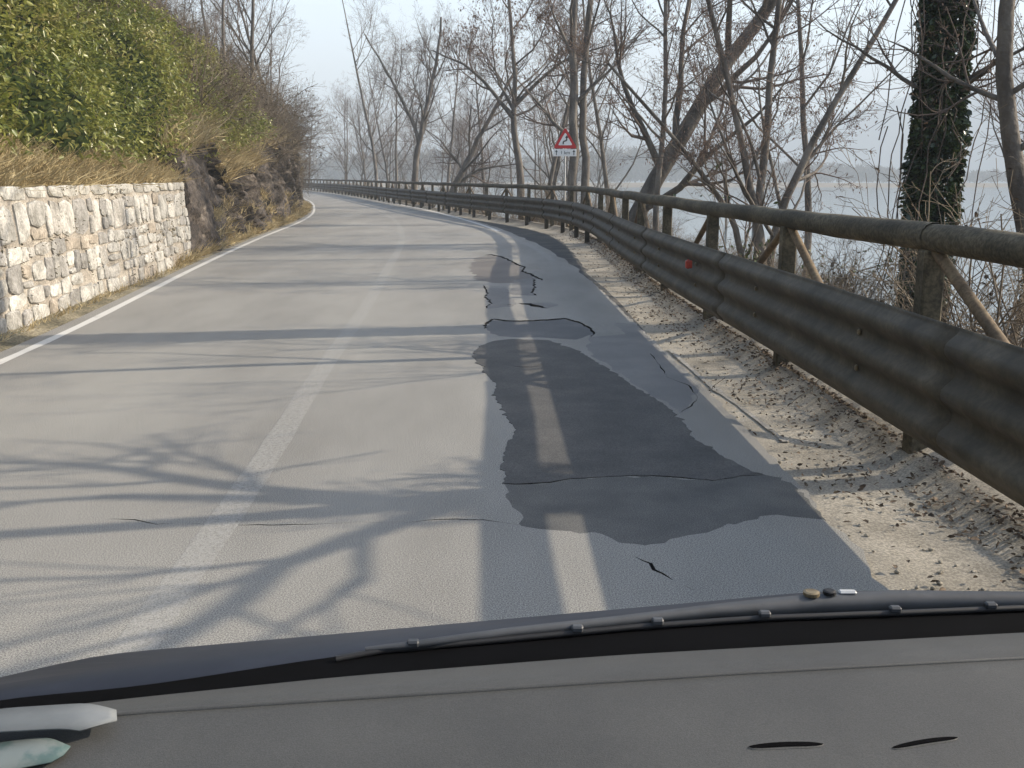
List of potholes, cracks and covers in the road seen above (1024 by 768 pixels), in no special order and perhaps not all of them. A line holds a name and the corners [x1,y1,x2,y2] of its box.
crack [456,254,625,337]
